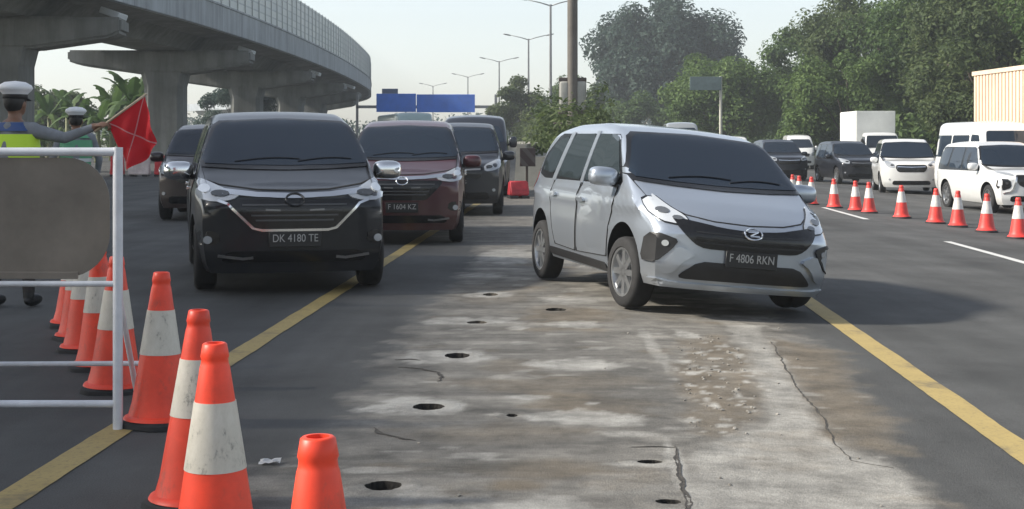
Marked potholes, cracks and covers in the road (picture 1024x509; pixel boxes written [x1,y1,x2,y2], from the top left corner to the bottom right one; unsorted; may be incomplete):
crack [397,359,444,381]
crack [770,341,893,468]
crack [374,428,413,440]
